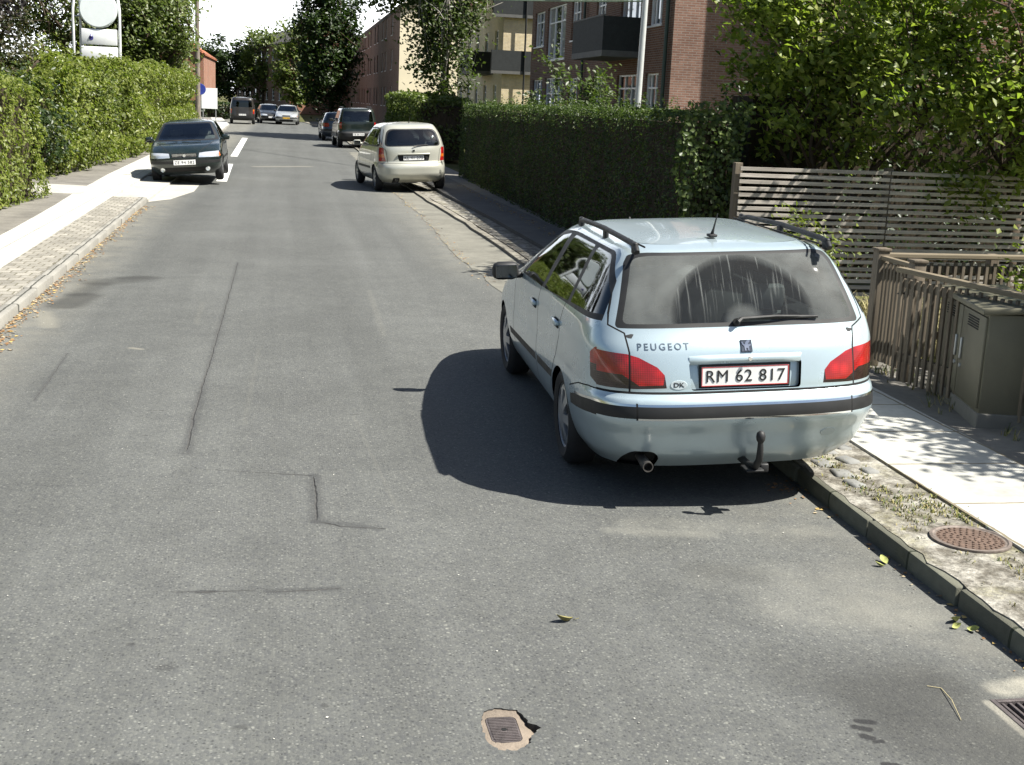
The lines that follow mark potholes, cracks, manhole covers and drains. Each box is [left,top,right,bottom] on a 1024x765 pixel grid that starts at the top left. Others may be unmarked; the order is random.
manhole cover [929,525,1012,553]
drain grate [990,698,1024,729]
